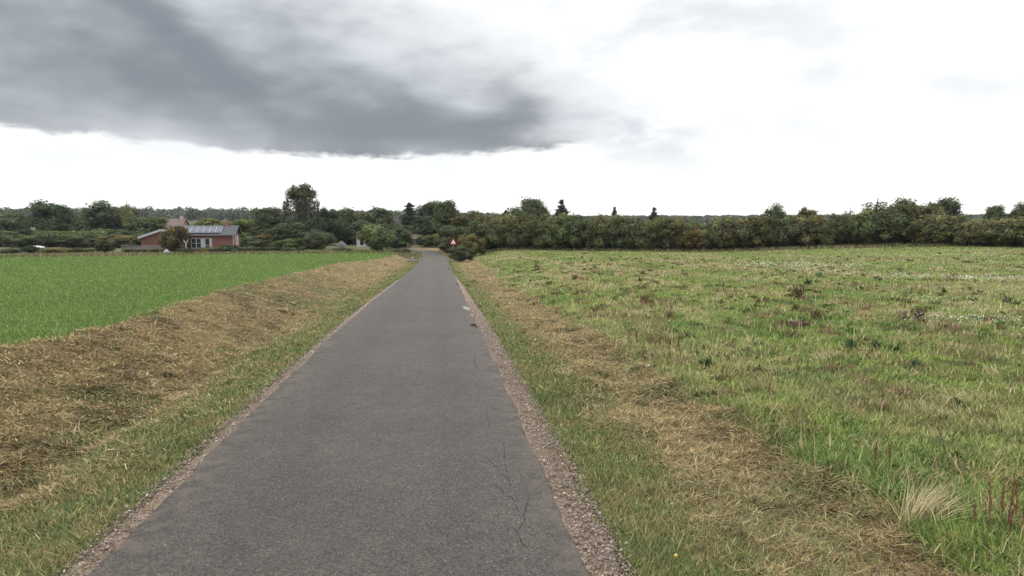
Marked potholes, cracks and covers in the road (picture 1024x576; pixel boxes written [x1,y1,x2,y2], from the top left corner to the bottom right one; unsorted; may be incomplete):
crack [487,415,534,547]
